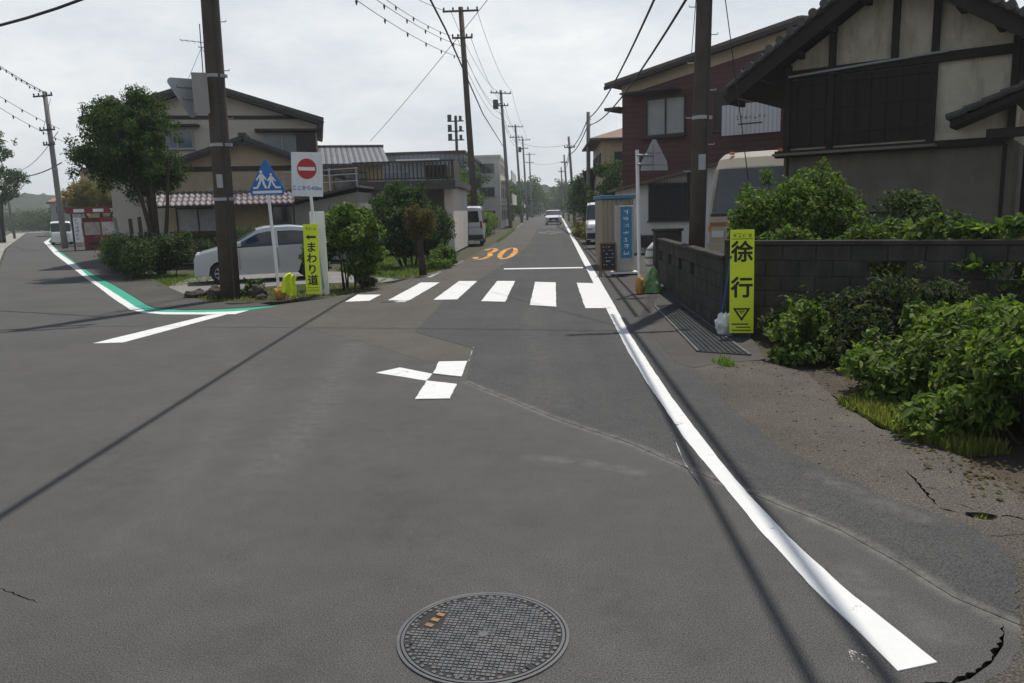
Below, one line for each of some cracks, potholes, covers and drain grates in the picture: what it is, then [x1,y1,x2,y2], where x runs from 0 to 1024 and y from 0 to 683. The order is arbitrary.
crack [906,471,1024,520]
manhole cover [396,592,570,683]
drain grate [654,303,752,356]
crack [936,627,1004,683]
pothole [965,512,998,520]
